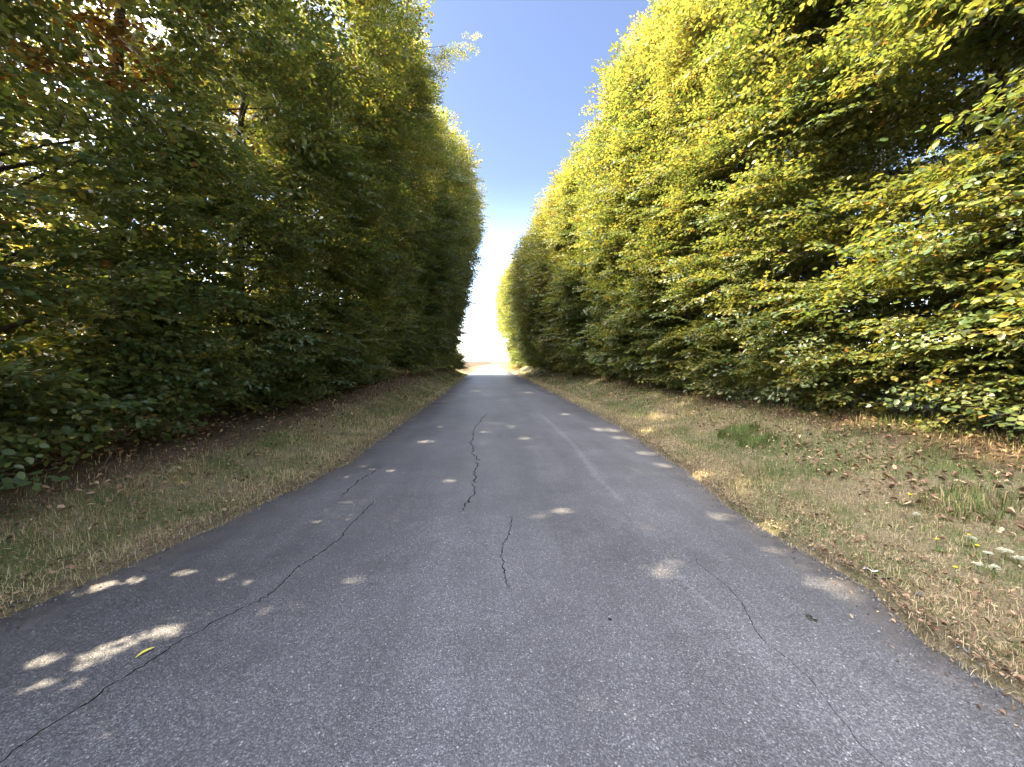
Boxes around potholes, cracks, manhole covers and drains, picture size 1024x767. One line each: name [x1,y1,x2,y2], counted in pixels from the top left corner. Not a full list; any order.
crack [676,527,885,767]
crack [500,515,513,589]
crack [0,500,374,763]
